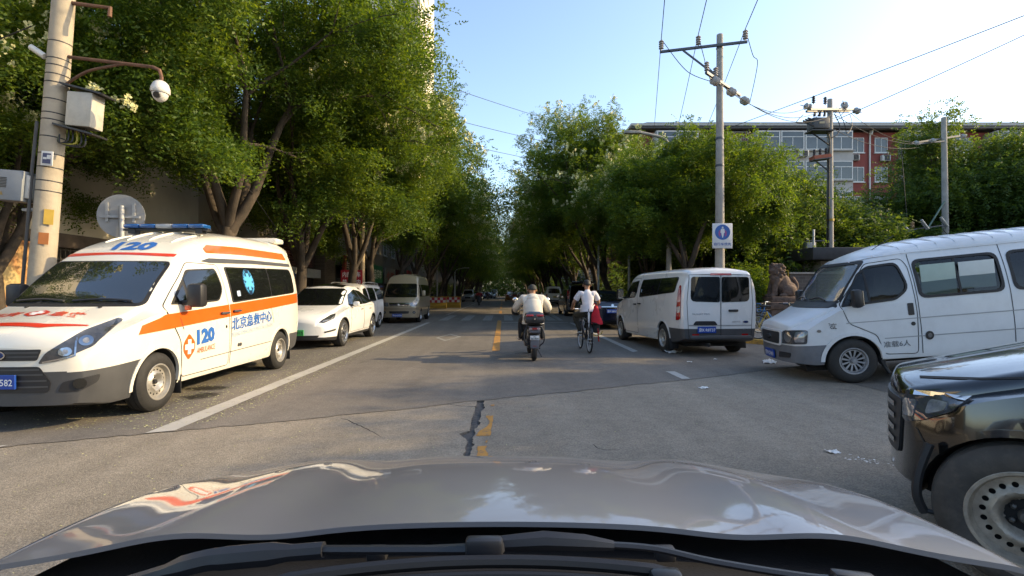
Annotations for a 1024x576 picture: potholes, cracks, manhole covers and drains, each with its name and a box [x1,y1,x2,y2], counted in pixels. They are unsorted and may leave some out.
crack [454,400,485,456]
